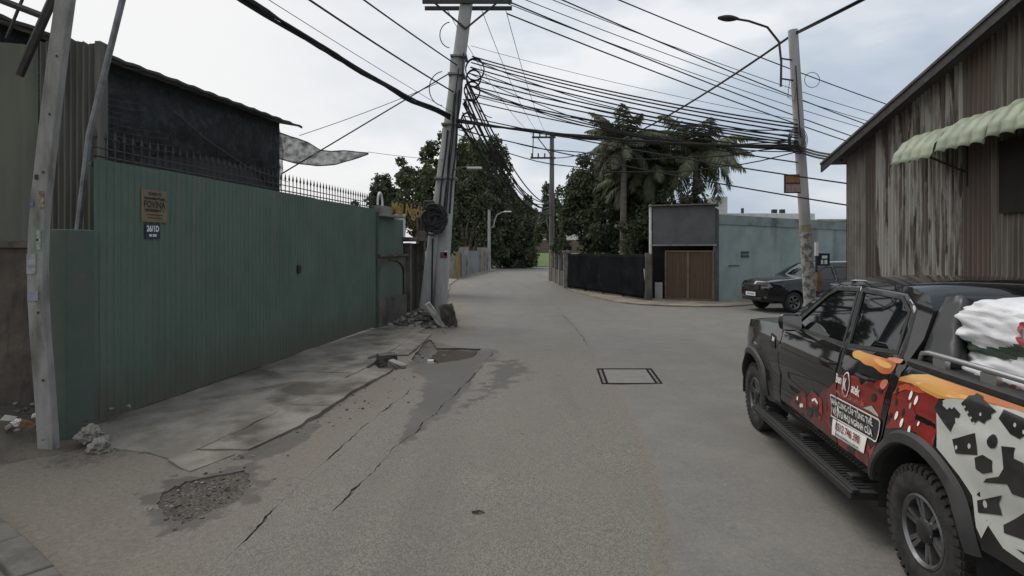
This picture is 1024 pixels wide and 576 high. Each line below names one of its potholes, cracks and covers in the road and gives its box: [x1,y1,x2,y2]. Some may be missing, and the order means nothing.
pothole [156,470,251,524]
crack [226,350,495,559]
manhole cover [597,368,663,384]
pothole [411,340,481,364]
